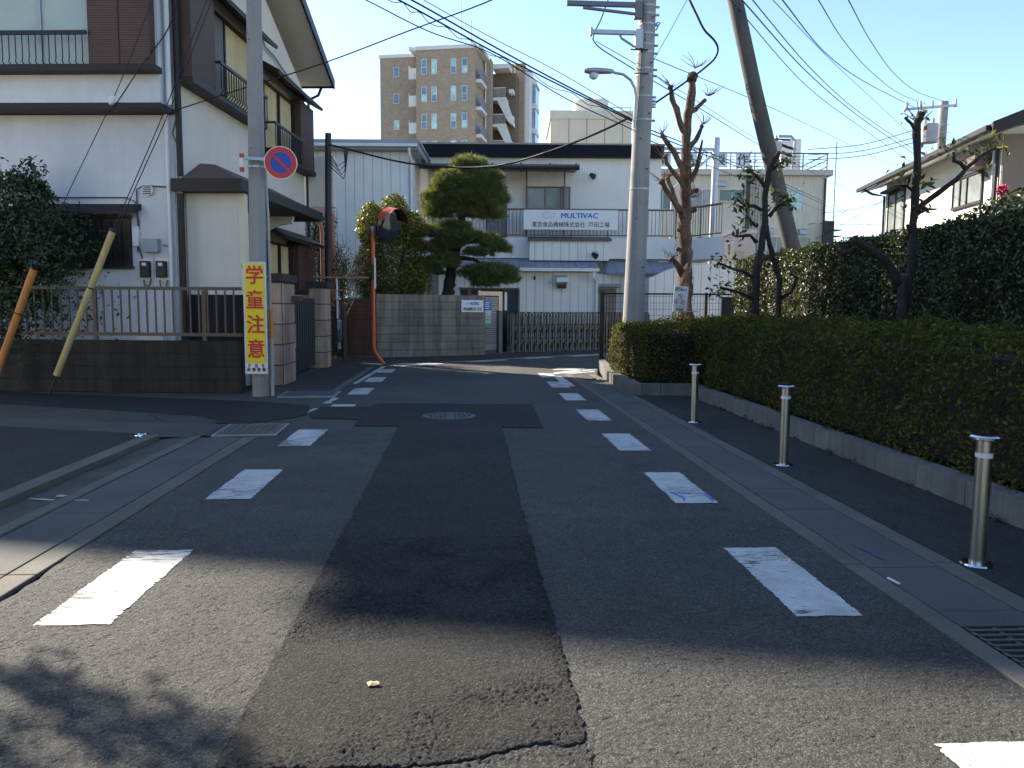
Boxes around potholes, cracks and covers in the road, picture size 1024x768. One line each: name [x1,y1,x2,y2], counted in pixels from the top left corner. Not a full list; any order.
manhole cover [423,412,476,420]
crack [447,739,587,765]
drain grate [964,627,1024,668]
